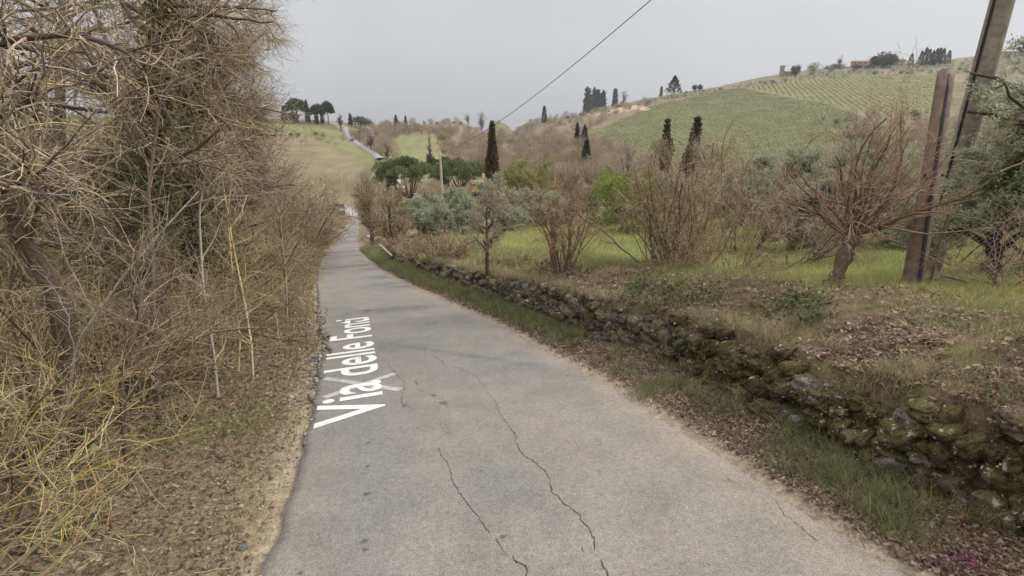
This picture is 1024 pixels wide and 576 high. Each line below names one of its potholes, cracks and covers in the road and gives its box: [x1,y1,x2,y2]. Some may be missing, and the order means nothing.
crack [424,346,609,576]
crack [387,361,528,576]
